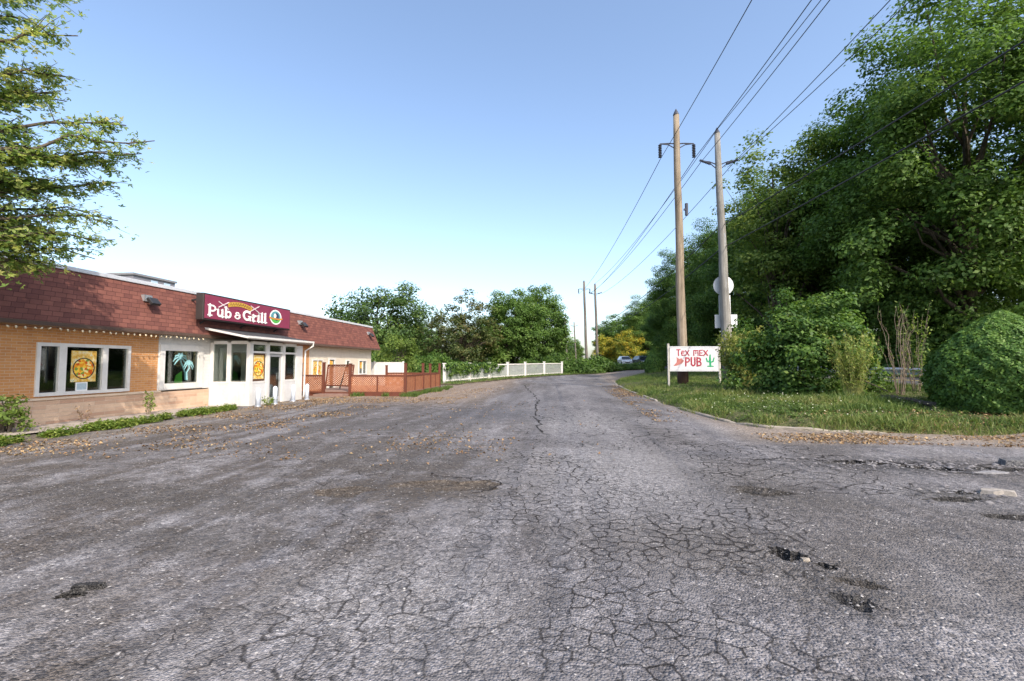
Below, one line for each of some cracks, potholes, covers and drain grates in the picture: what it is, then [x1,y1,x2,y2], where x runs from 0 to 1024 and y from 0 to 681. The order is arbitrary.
pothole [816,587,890,617]
pothole [45,590,95,601]
pothole [812,562,839,570]
pothole [730,484,797,497]
crack [668,442,1022,498]
pothole [388,479,512,492]
crack [467,436,853,681]
crack [515,386,695,438]
